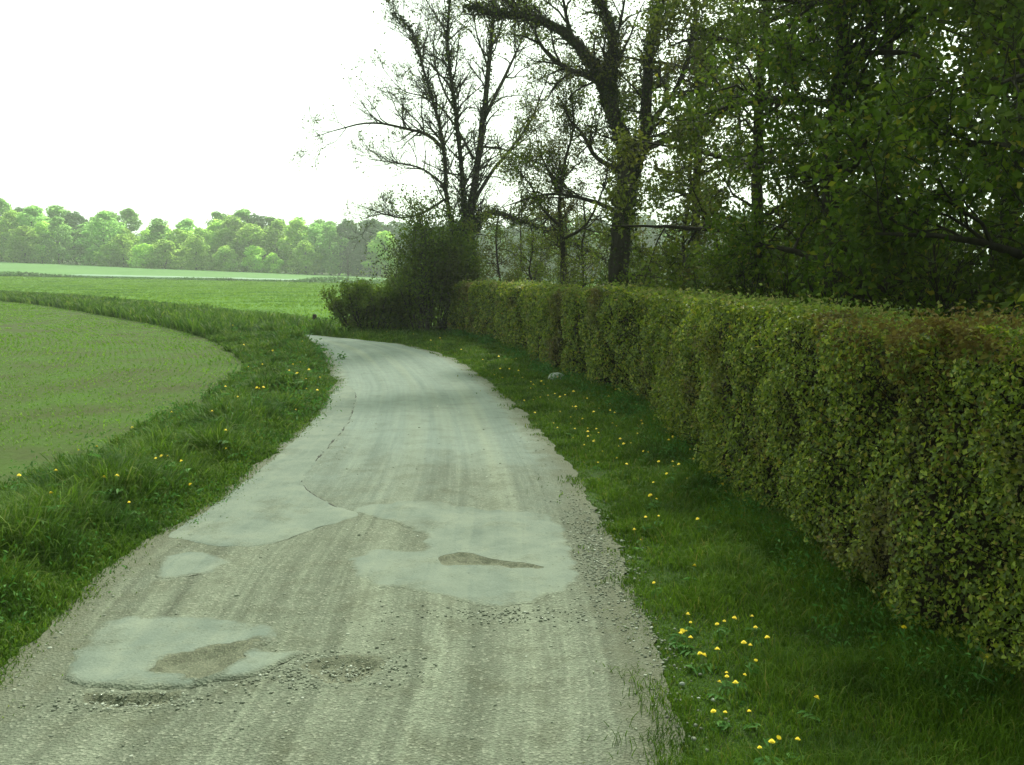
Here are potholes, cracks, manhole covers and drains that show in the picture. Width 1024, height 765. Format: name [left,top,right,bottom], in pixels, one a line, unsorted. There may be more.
pothole [295,652,394,688]
pothole [149,638,262,687]
pothole [438,552,544,569]
pothole [74,689,190,713]
